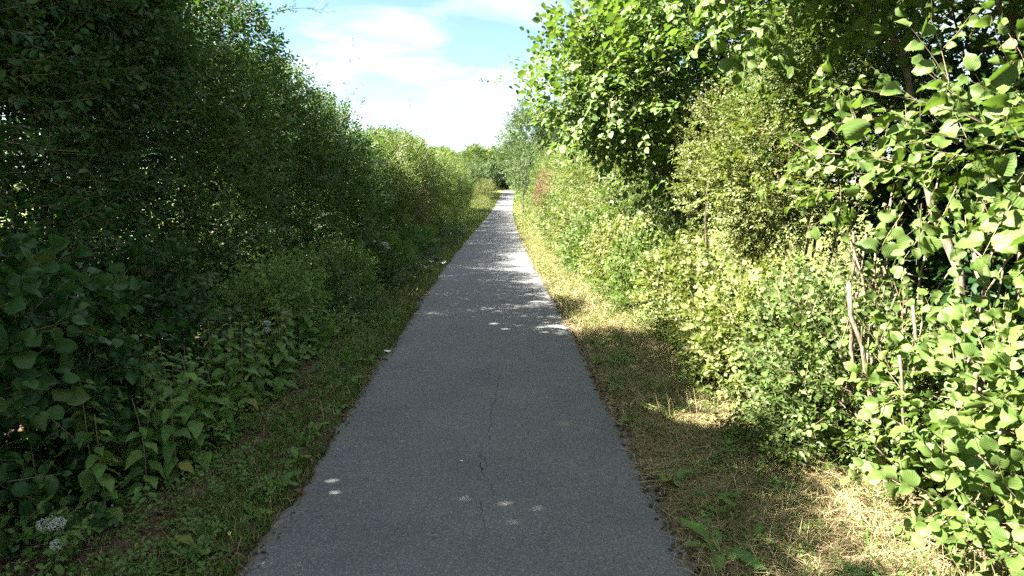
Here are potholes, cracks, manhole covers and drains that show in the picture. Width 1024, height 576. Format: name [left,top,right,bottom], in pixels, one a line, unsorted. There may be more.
crack [479,346,501,531]
